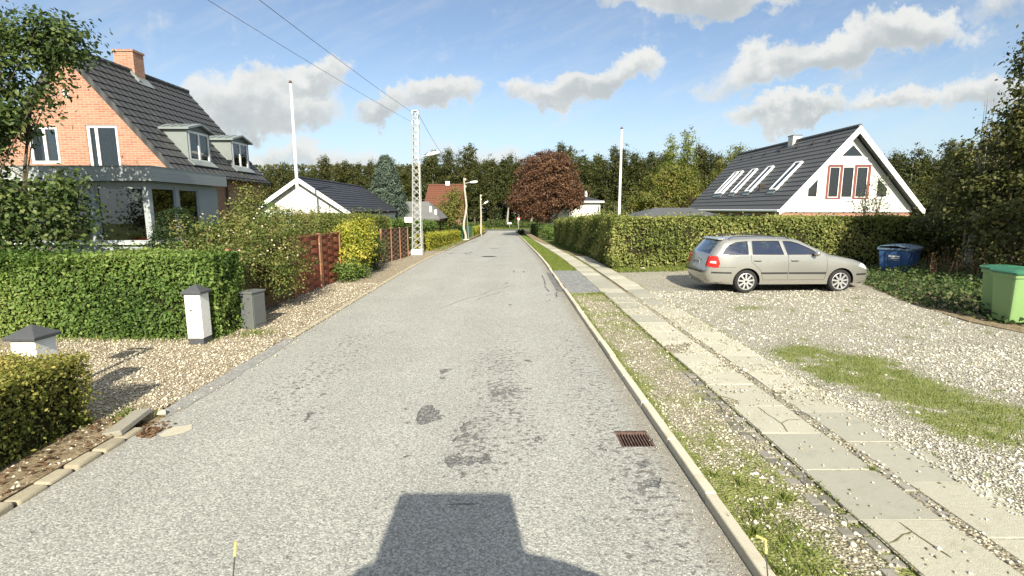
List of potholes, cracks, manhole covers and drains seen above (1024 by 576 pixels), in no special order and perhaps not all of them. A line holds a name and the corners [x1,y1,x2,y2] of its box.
drain grate [614,431,655,447]
crack [445,283,515,307]
crack [892,523,952,558]
